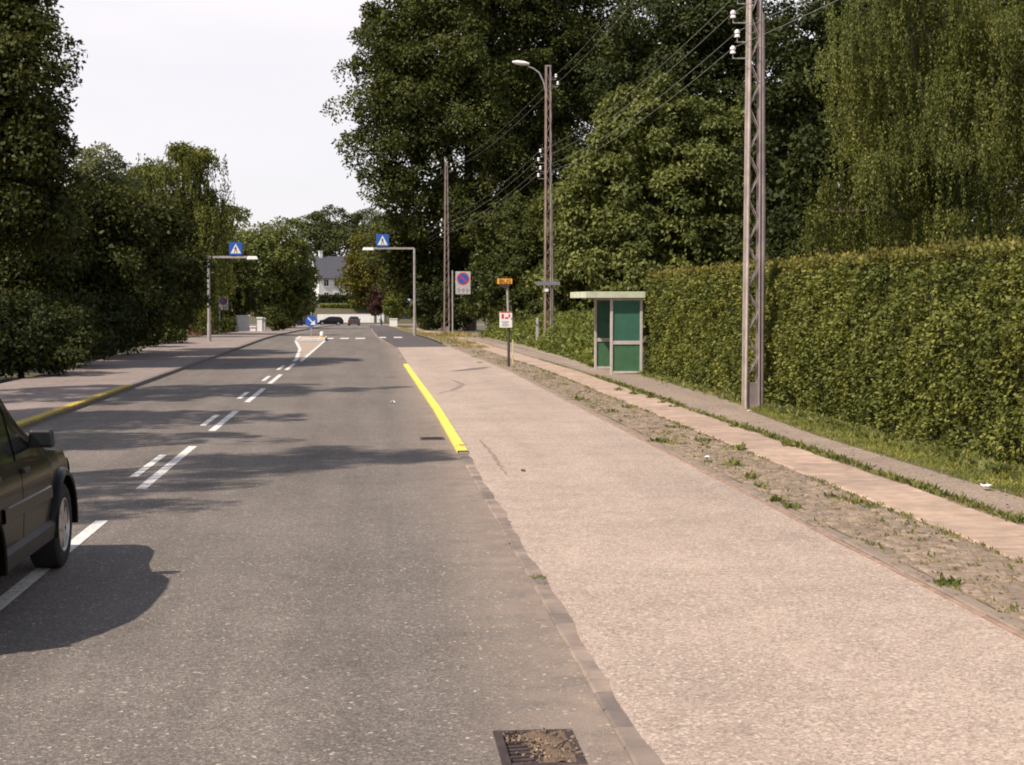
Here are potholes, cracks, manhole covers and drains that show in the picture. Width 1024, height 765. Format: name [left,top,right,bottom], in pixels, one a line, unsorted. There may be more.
crack [480,440,508,475]
drain grate [493,728,588,765]
crack [440,380,465,393]
